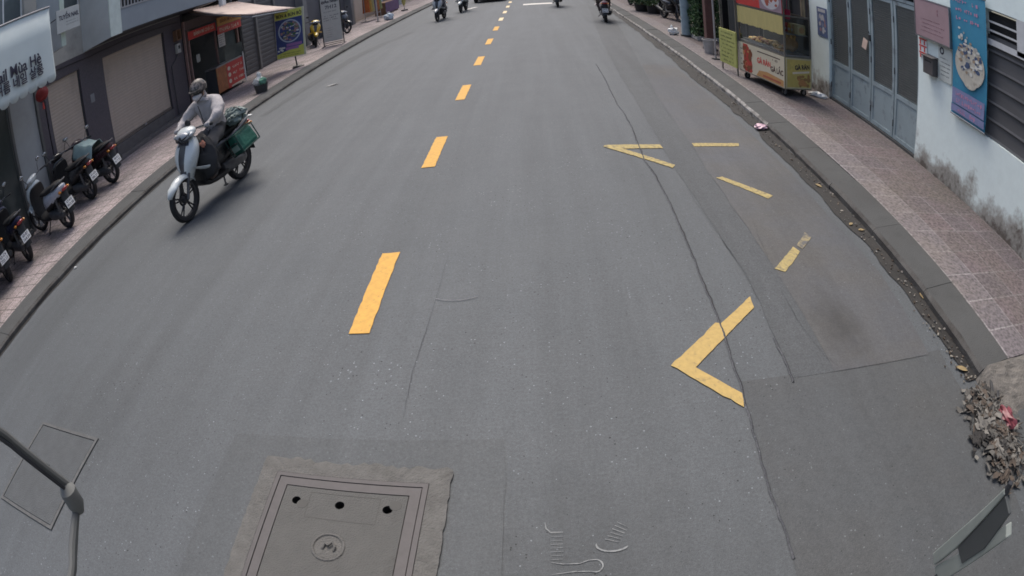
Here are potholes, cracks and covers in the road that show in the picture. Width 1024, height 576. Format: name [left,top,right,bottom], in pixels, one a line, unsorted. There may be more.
crack [596,64,838,559]
manhole cover [223,456,454,576]
manhole cover [1,422,99,531]
